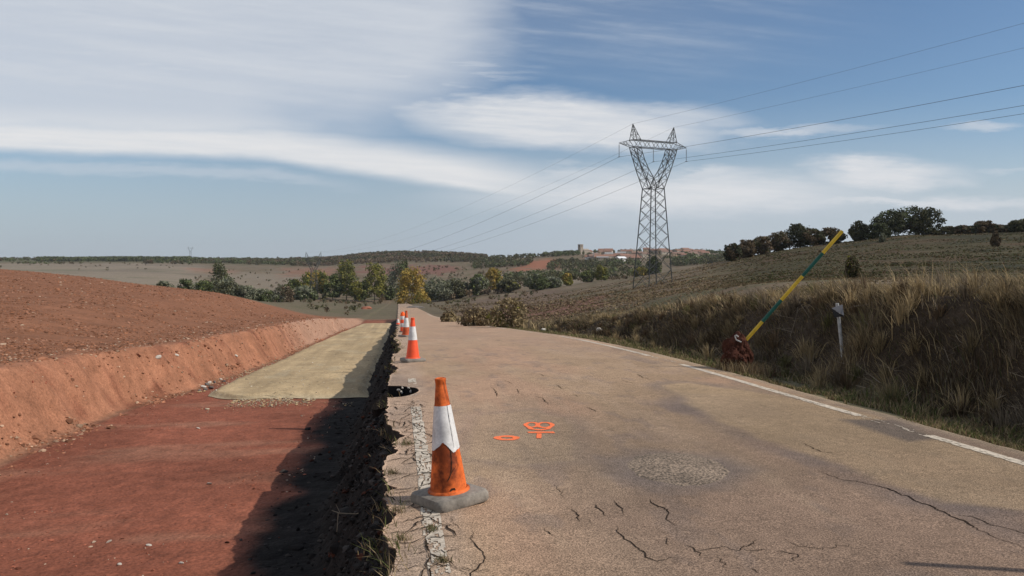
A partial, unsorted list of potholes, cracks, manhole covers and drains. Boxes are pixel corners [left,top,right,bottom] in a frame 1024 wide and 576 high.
crack [387,401,491,576]
crack [826,473,1023,544]
crack [559,490,849,565]
